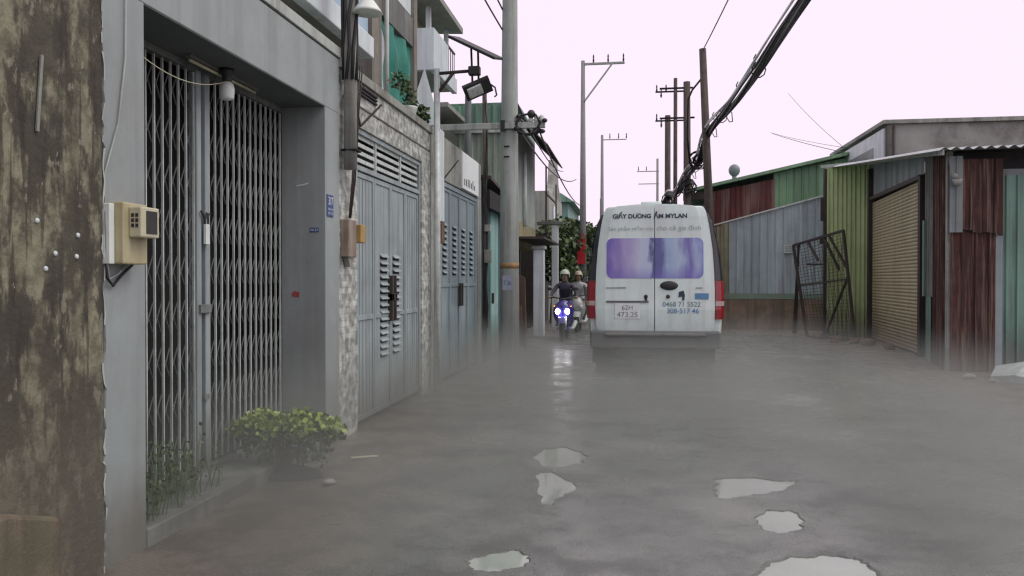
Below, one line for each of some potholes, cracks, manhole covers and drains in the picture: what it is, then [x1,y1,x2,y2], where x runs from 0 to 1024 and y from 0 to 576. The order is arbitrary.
pothole [466,549,531,572]
pothole [535,471,580,506]
pothole [530,446,588,467]
pothole [712,477,799,498]
pothole [754,509,805,533]
pothole [751,554,883,576]
